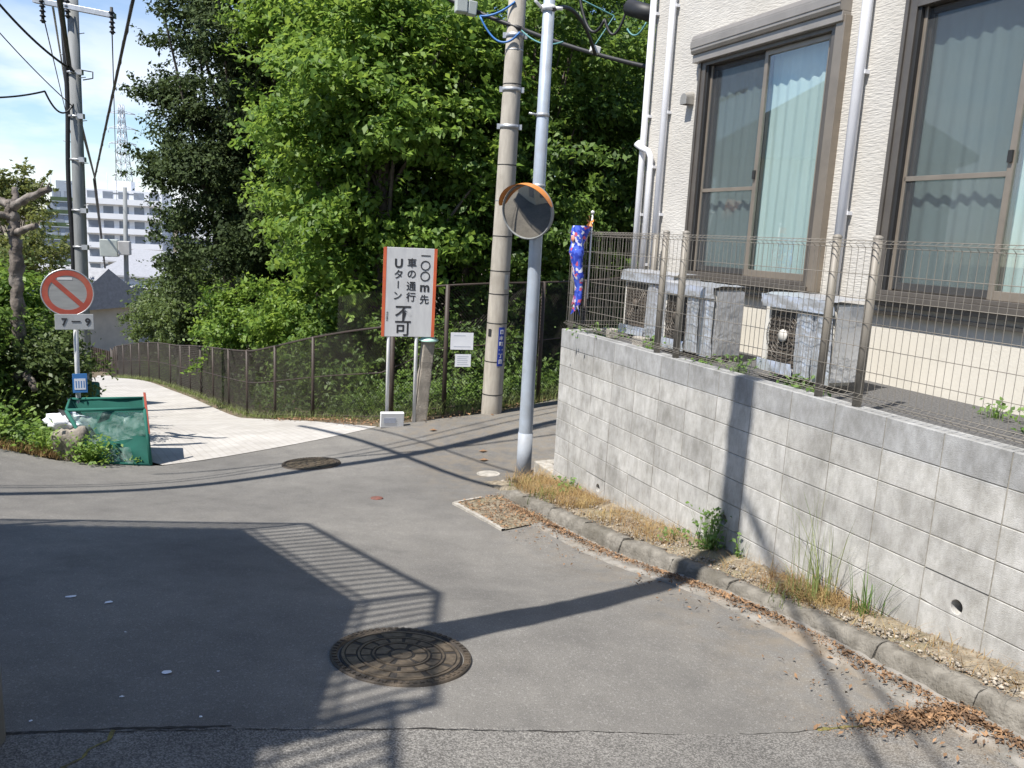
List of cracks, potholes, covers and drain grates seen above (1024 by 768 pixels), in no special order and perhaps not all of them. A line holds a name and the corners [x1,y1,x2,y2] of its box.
manhole cover [329,627,472,687]
manhole cover [281,457,341,470]
